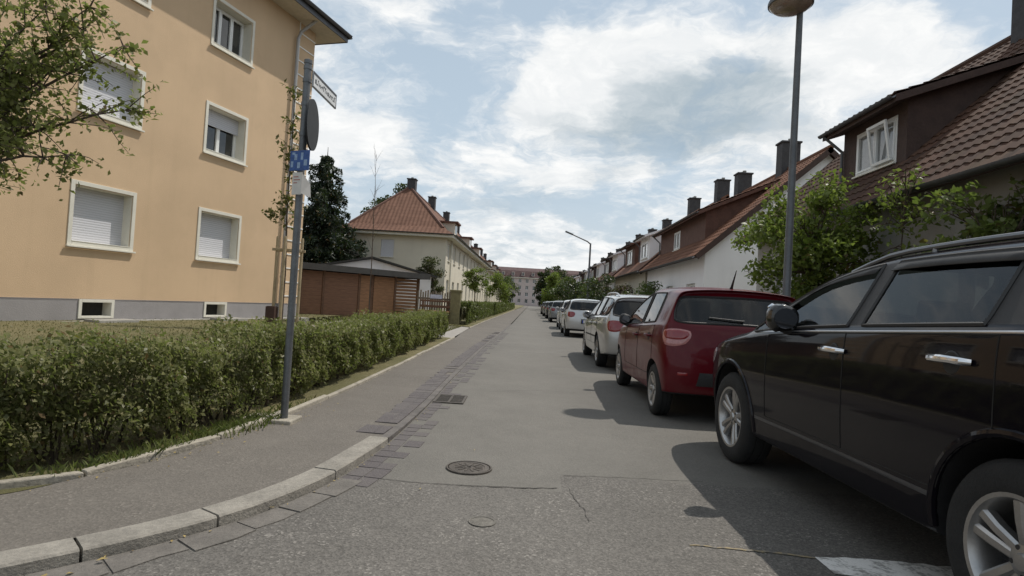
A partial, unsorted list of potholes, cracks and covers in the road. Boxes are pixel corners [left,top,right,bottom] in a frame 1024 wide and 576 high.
utility cover [468,516,496,527]
crack [564,475,703,520]
drain grate [432,394,468,404]
manhole cover [446,461,492,475]
